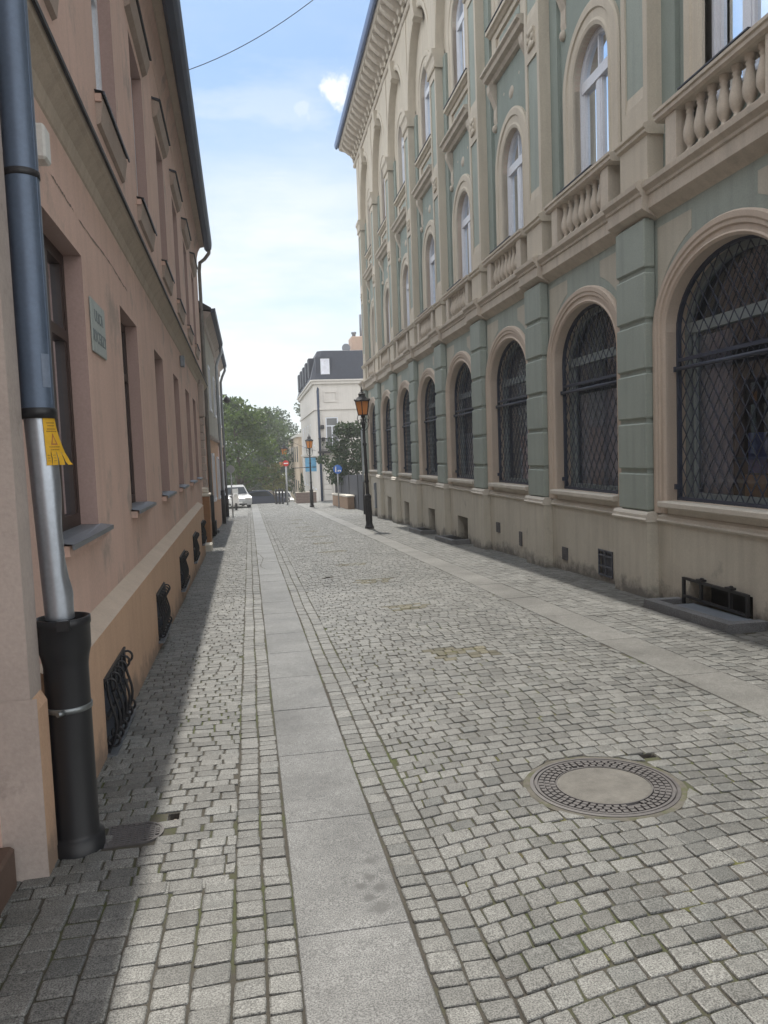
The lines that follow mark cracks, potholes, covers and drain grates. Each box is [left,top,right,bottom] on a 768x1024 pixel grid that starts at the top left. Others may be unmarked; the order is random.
manhole cover [523,757,688,822]
